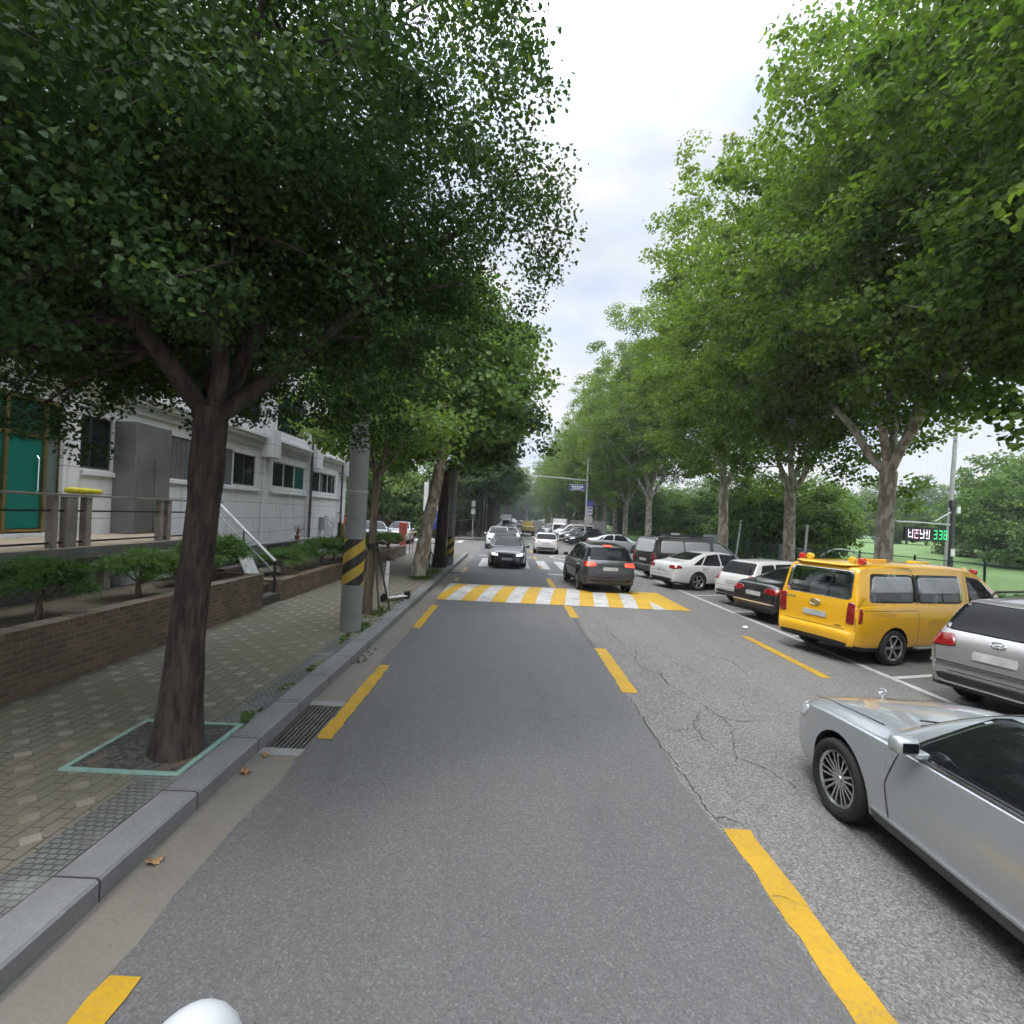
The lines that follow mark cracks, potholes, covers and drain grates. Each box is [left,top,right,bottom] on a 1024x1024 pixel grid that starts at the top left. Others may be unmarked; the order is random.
crack [574,616,803,793]
drain grate [256,700,346,757]
crack [630,699,741,824]
